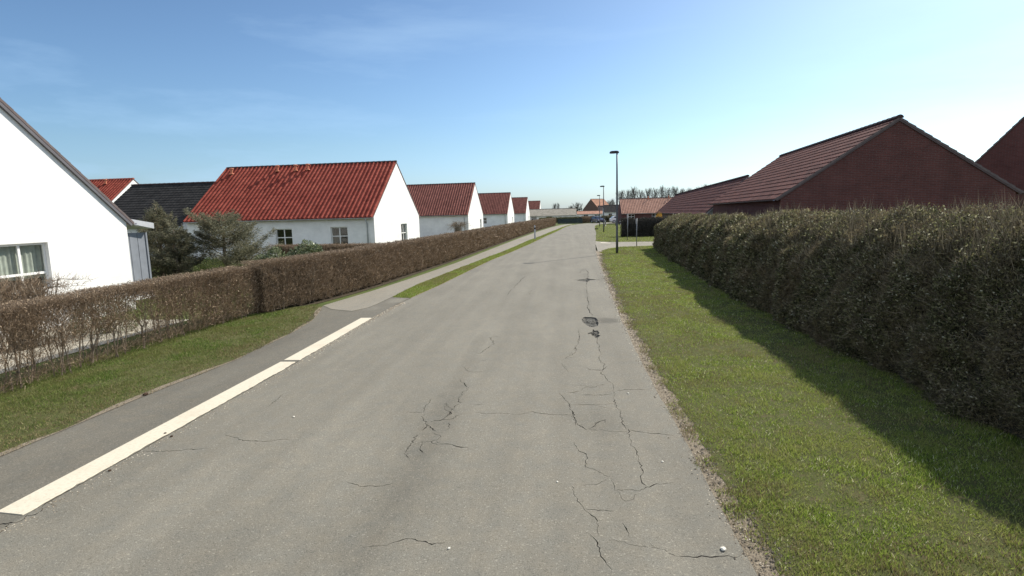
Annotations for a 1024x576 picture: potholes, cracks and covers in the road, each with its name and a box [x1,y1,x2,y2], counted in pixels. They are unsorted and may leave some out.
crack [623,524,735,558]
crack [478,336,673,570]
pothole [582,317,598,327]
crack [405,337,494,458]
